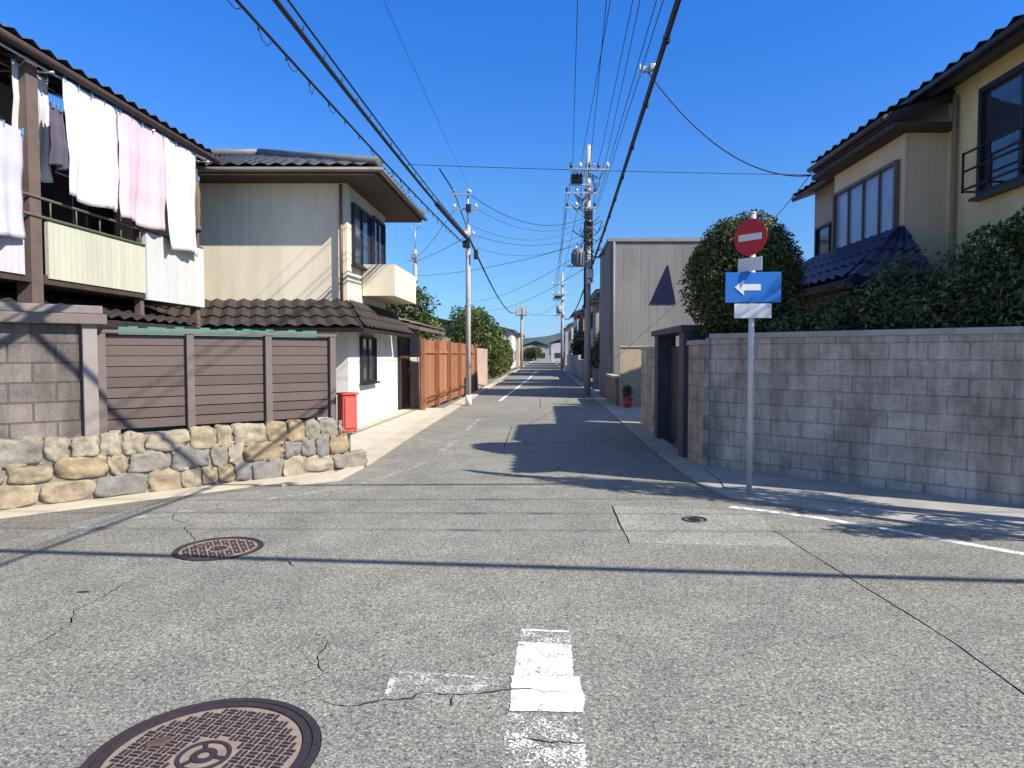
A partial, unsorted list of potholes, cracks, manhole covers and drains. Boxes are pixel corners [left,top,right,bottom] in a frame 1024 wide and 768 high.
crack [15,570,158,658]
manhole cover [172,537,264,561]
manhole cover [80,698,321,768]
crack [289,640,519,707]
